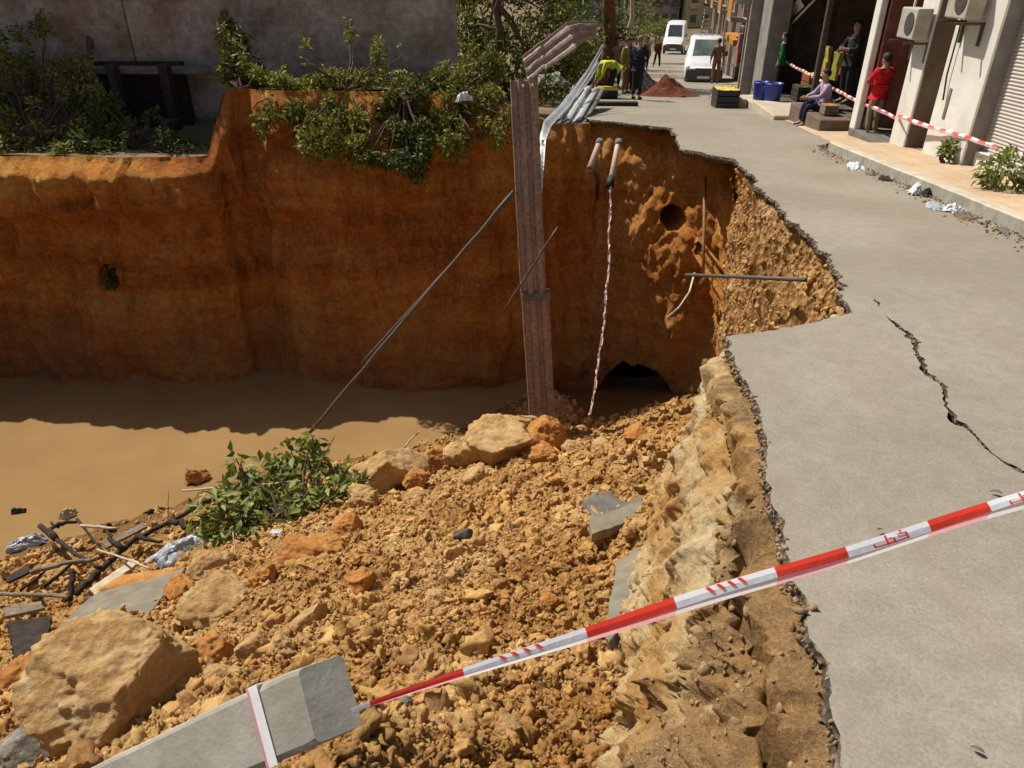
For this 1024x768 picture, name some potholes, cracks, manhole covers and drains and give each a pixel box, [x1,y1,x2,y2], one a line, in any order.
crack [874,299,1024,473]
